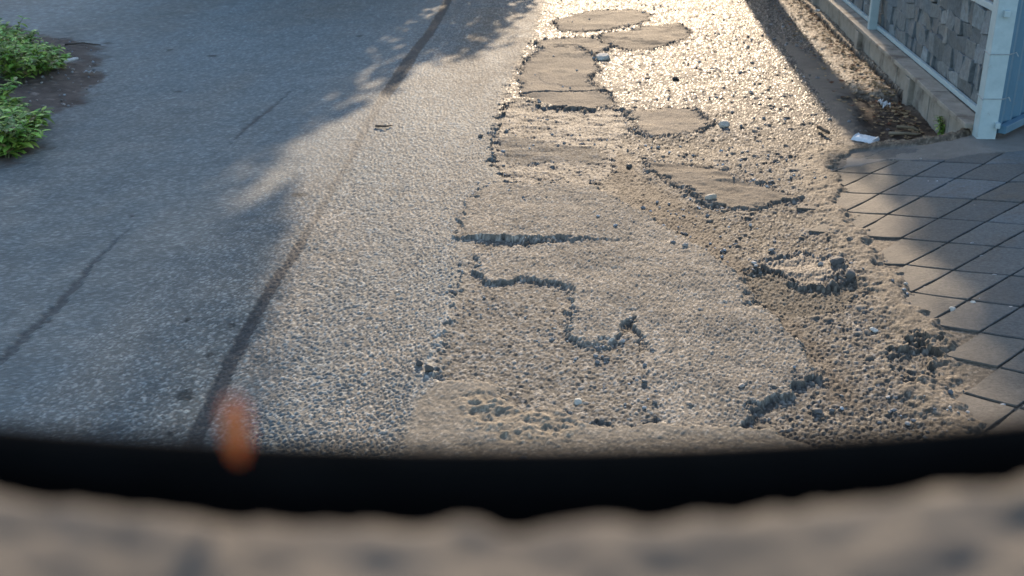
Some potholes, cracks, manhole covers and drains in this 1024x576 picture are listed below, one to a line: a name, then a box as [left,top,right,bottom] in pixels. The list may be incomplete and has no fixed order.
crack [0,229,131,365]
crack [230,86,299,145]
pothole [885,339,942,383]
pothole [743,268,869,317]
